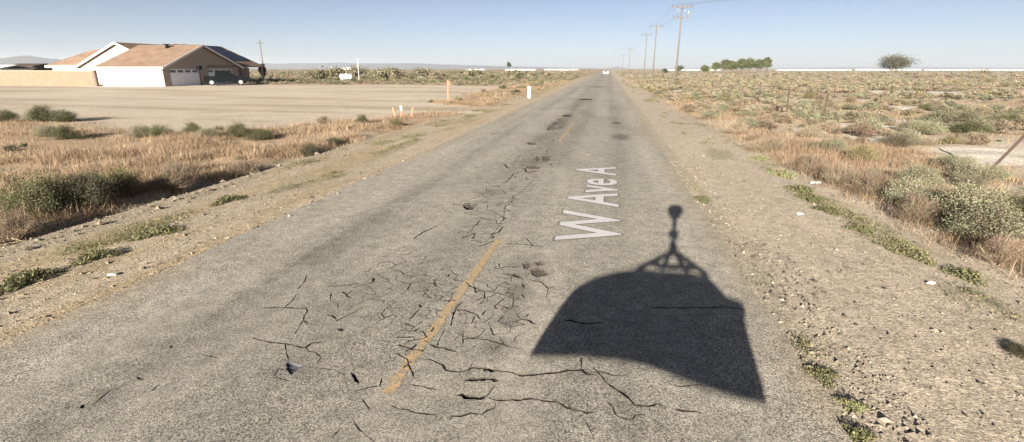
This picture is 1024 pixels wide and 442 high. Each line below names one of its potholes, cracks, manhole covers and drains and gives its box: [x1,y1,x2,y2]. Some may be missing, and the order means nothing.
crack [327,117,705,442]
crack [253,275,334,393]
pothole [522,261,549,277]
pothole [285,361,304,375]
